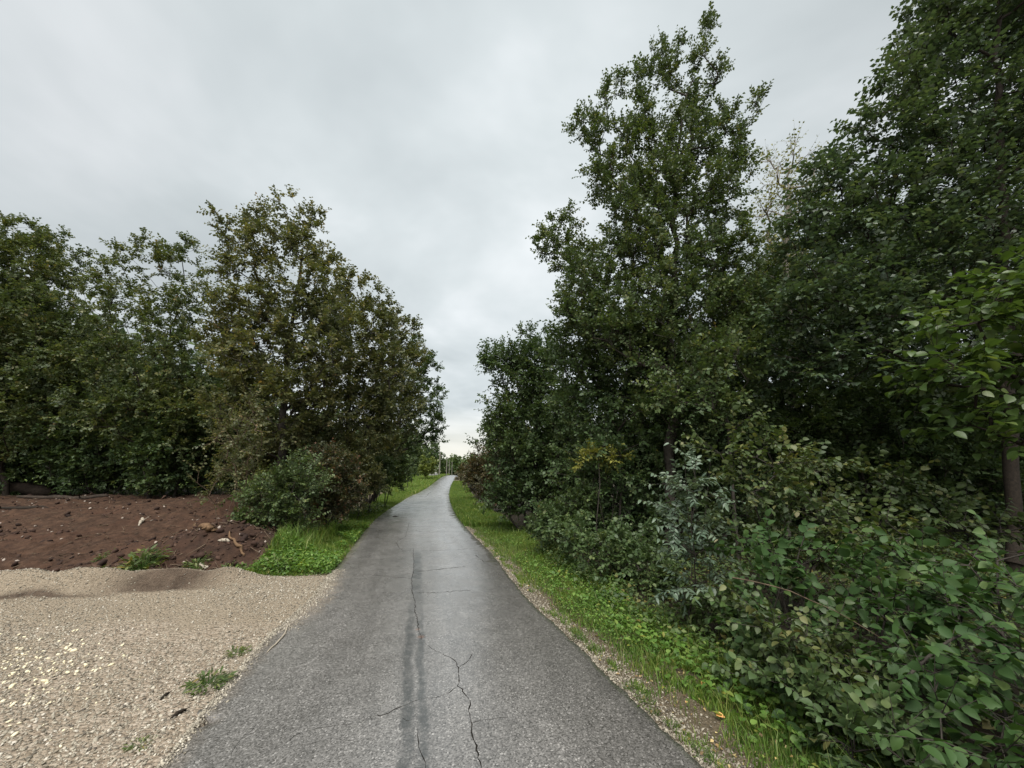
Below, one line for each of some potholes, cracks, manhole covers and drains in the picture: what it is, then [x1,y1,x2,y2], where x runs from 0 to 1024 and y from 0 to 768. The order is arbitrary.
crack [364,528,484,635]
crack [289,644,503,768]
